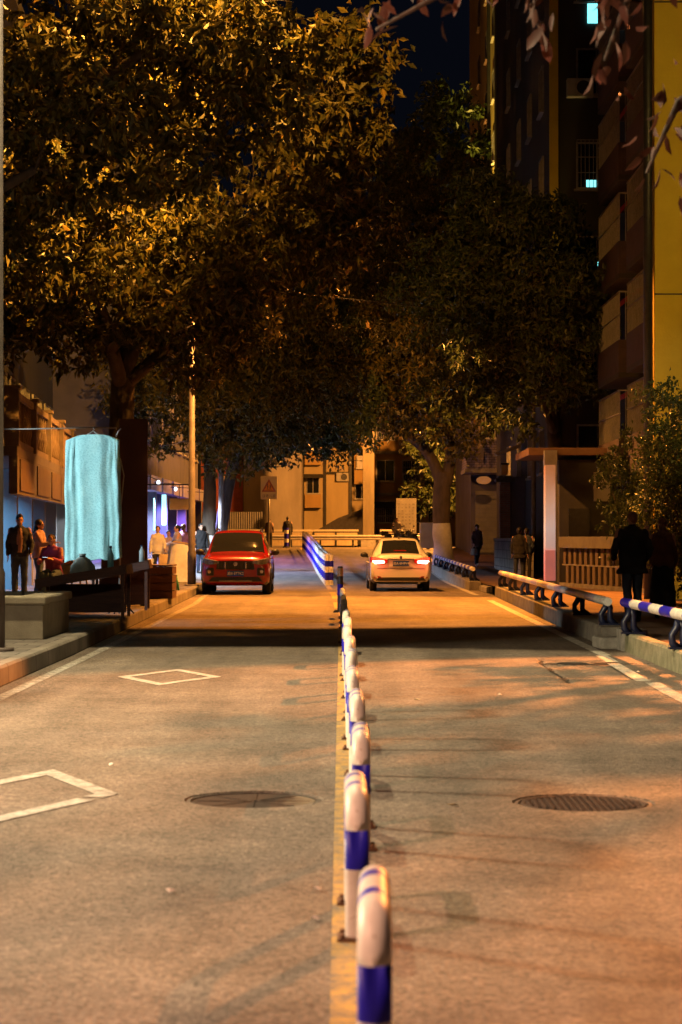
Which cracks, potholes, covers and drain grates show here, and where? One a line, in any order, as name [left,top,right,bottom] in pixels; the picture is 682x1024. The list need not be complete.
manhole cover [514,795,652,811]
manhole cover [187,792,321,808]
